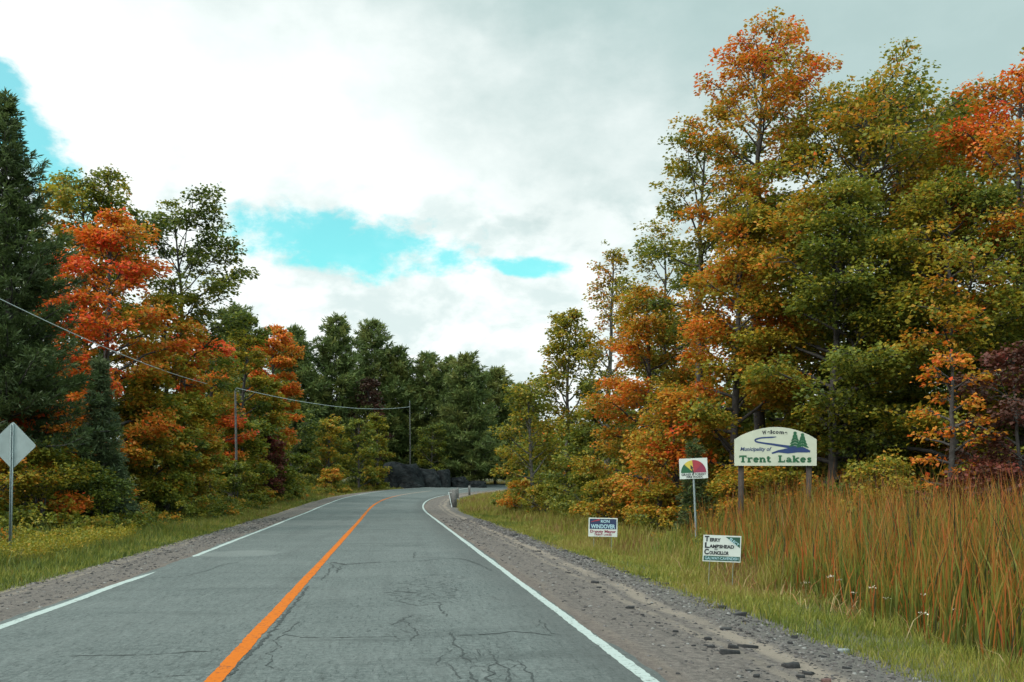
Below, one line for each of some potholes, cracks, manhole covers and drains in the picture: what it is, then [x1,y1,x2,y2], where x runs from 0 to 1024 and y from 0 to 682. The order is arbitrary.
crack [265,552,560,682]
